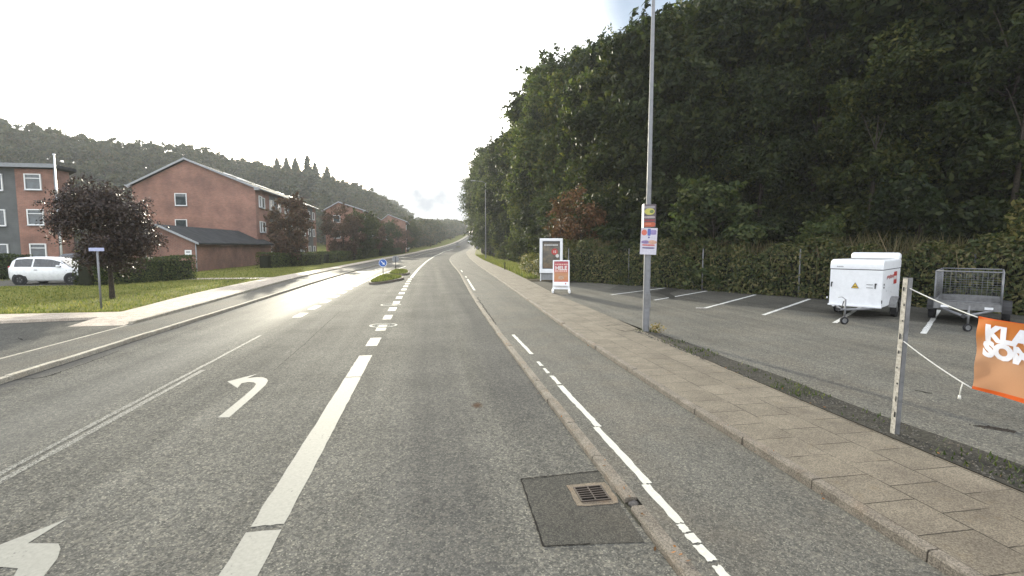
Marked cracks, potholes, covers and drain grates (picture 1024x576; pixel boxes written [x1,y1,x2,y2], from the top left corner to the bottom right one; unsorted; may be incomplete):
drain grate [566,482,618,506]
